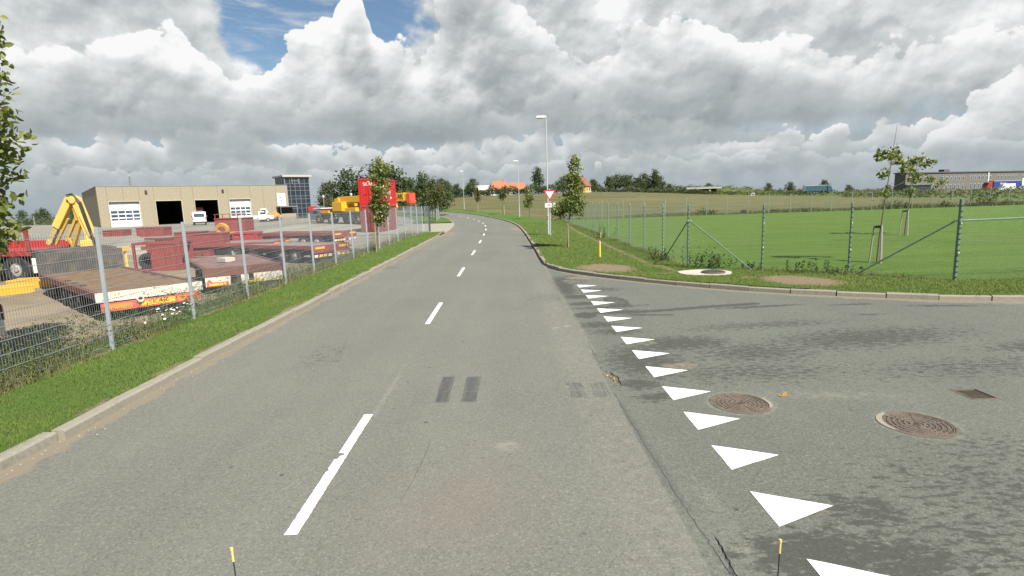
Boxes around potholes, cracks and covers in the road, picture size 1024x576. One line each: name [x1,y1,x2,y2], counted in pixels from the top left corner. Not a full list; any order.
manhole cover [876,411,961,439]
drain grate [949,388,1000,400]
manhole cover [709,393,773,415]
